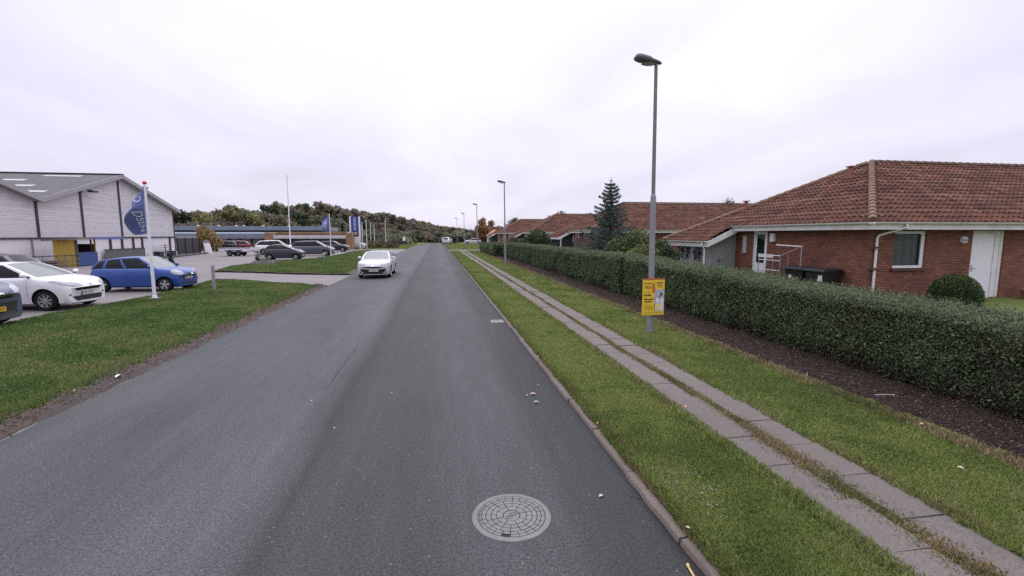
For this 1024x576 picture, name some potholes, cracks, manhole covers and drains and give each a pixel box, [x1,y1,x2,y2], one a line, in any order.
manhole cover [472,494,551,542]
